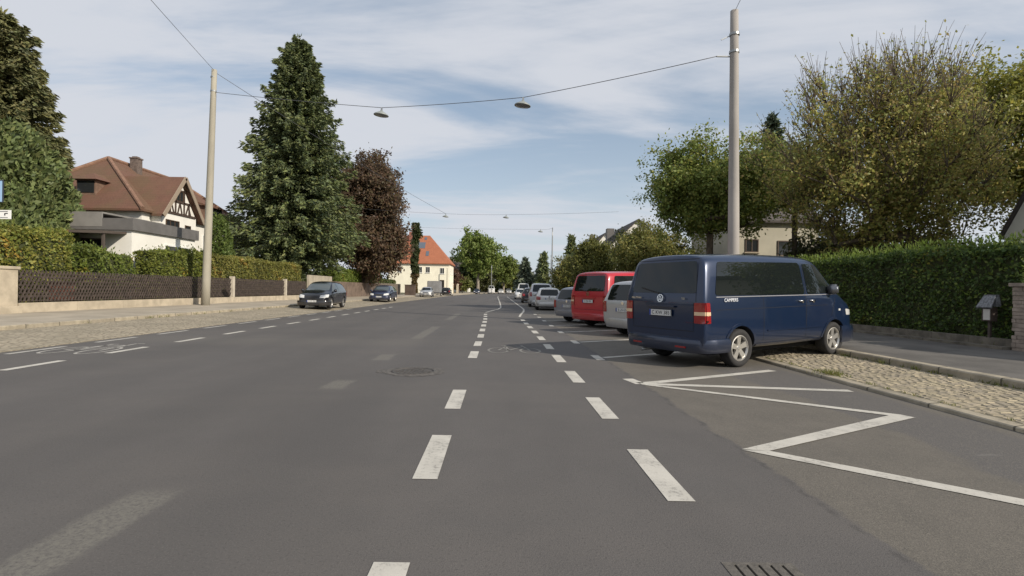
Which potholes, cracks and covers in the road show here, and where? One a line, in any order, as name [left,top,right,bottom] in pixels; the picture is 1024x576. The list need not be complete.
manhole cover [375,366,445,377]
drain grate [721,562,805,576]
